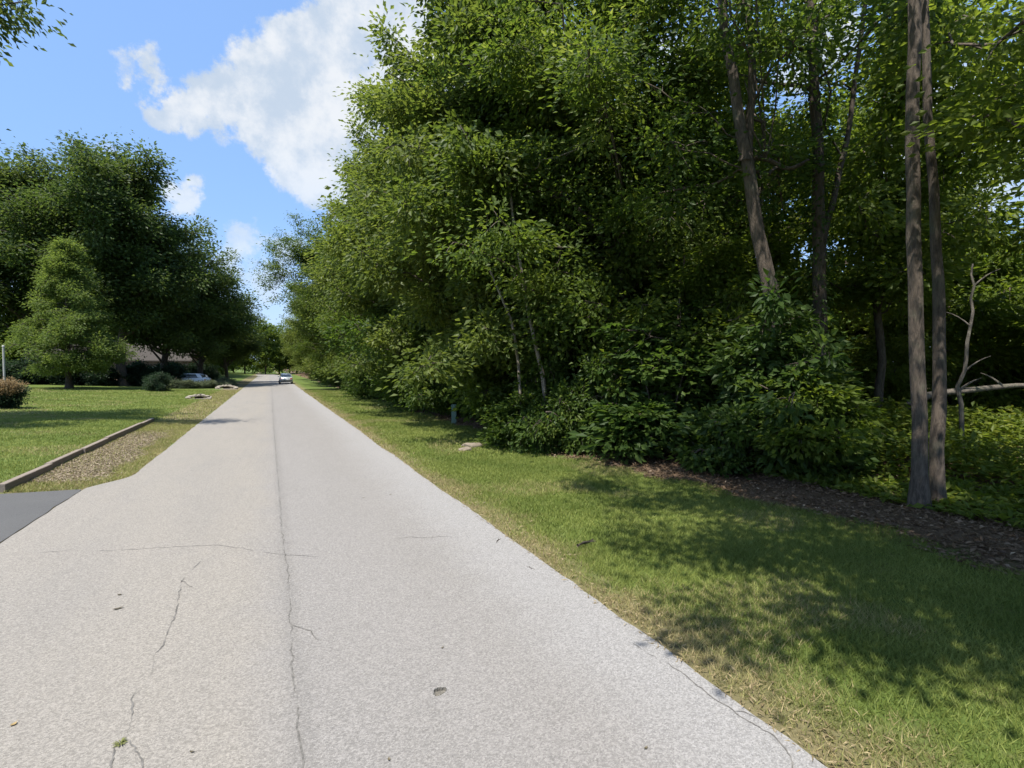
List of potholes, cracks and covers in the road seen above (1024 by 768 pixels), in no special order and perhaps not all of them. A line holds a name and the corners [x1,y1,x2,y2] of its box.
crack [50,408,317,768]
crack [633,643,793,768]
